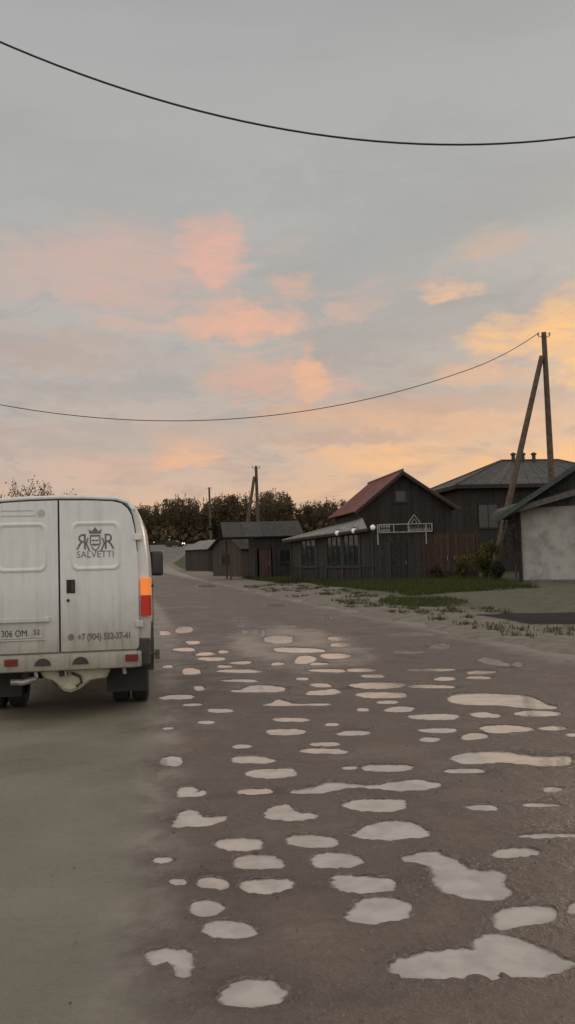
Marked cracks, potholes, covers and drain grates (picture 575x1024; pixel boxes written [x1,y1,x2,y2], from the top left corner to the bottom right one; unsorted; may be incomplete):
pothole [446,692,559,709]
pothole [448,749,575,767]
pothole [346,818,433,841]
pothole [170,807,230,828]
pothole [386,930,575,980]
pothole [215,975,295,1008]
pothole [490,902,559,930]
pothole [235,876,297,894]
pothole [397,848,515,901]
pothole [140,943,199,978]
pothole [339,893,415,925]
pothole [199,917,259,939]
